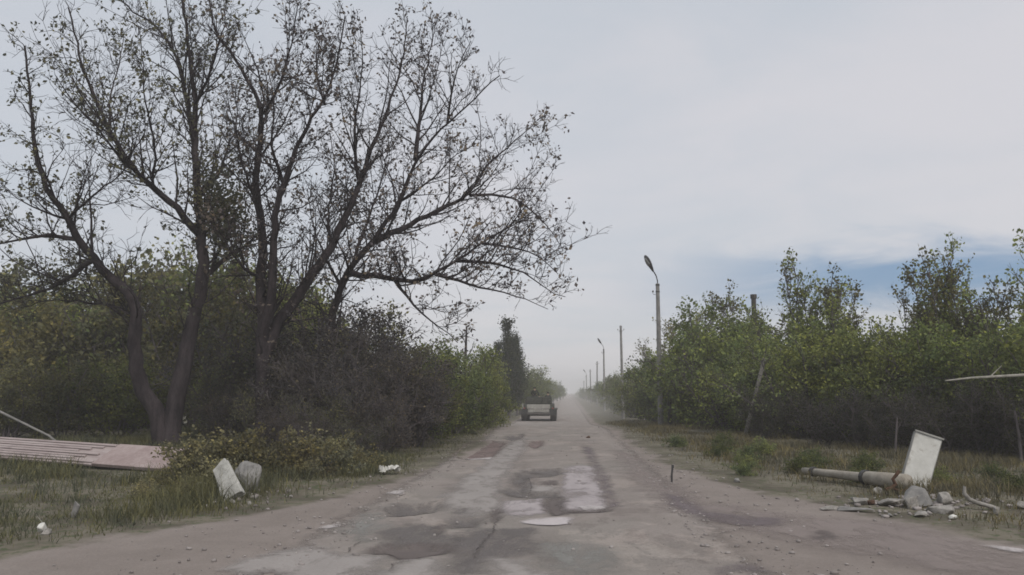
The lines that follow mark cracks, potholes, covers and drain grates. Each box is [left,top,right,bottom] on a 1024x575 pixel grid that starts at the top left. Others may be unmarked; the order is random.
crack [465,519,499,563]
pothole [505,468,563,499]
